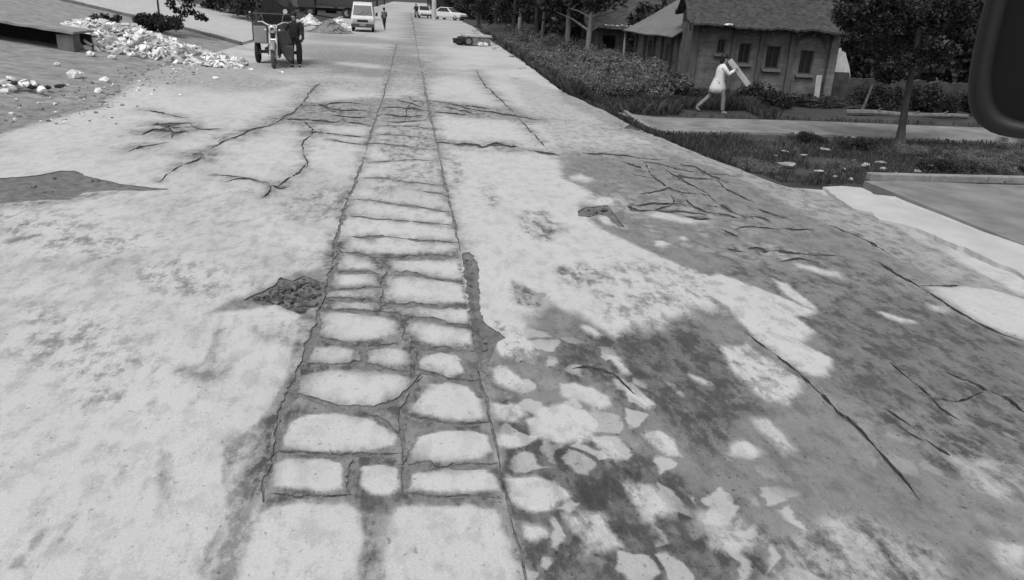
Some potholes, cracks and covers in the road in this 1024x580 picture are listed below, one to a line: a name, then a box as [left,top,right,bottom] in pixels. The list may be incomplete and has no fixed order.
pothole [245,276,326,315]
crack [572,365,635,395]
pothole [578,205,624,227]
crack [582,152,1022,341]
crack [437,142,559,156]
crack [220,97,538,198]
pothole [462,252,506,374]
crack [747,333,1024,500]
